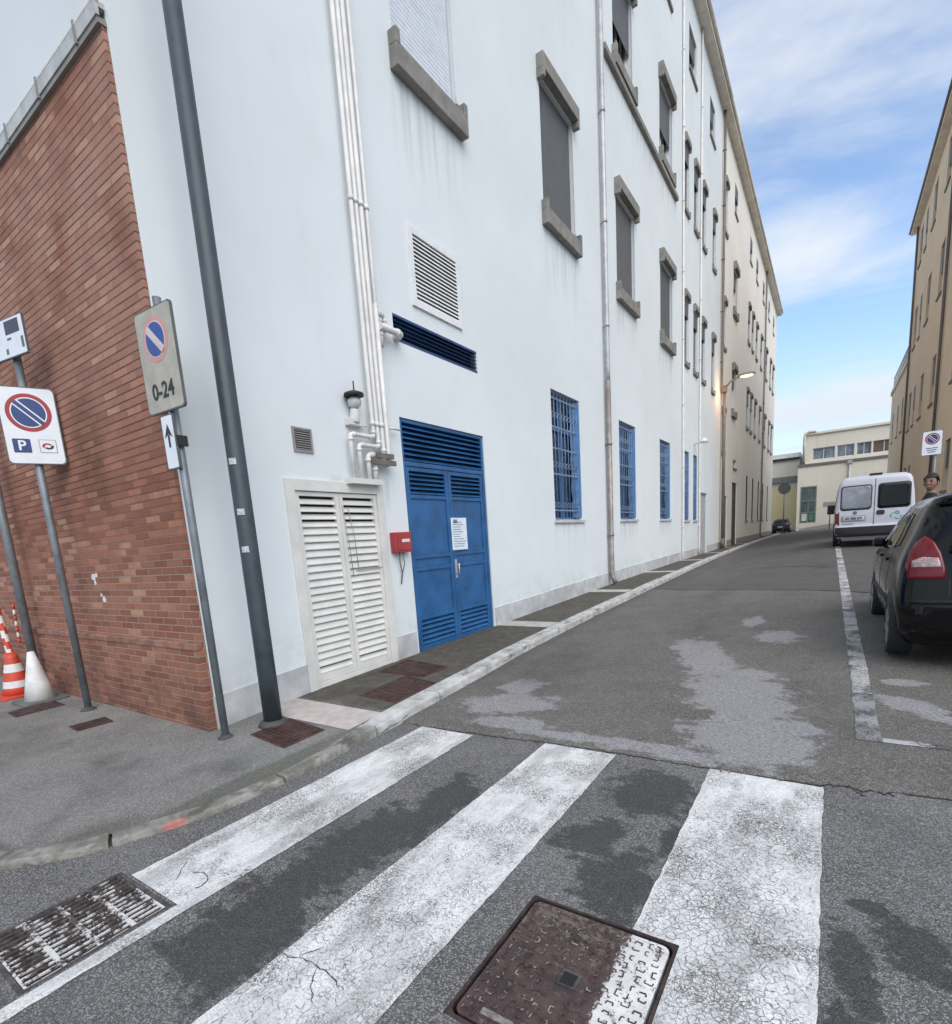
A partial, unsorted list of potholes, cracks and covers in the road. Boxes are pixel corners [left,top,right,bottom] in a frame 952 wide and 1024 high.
manhole cover [69,717,113,731]
manhole cover [359,676,437,702]
manhole cover [250,718,325,748]
manhole cover [378,659,447,677]
manhole cover [444,895,679,1024]
manhole cover [8,701,65,717]
drain grate [0,872,172,996]
crack [212,825,518,1024]
